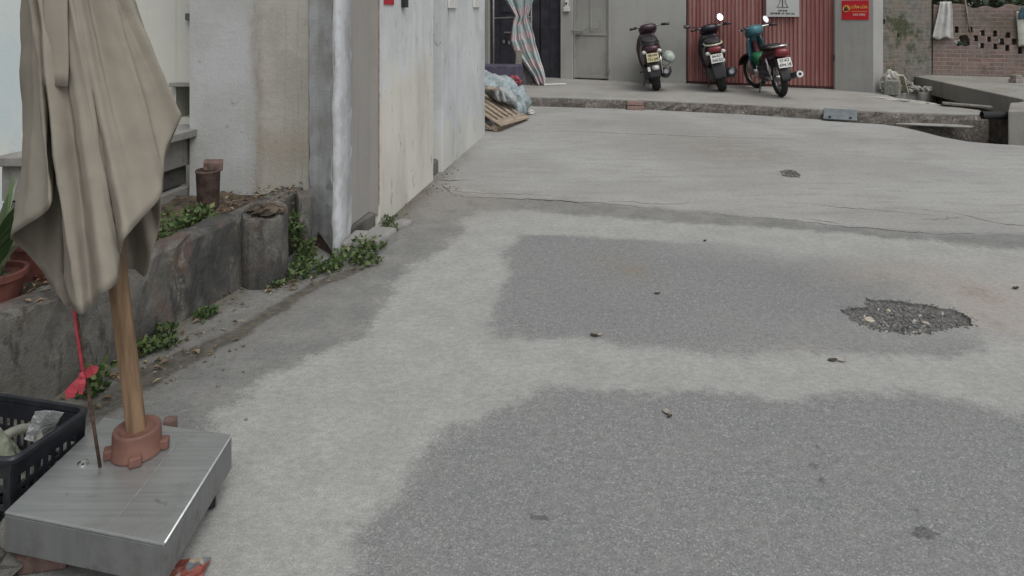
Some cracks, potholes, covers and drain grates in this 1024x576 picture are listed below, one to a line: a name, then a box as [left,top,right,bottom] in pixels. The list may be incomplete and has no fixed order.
crack [711,202,1024,234]
crack [442,180,688,207]
pothole [779,170,801,178]
pothole [839,299,973,335]
